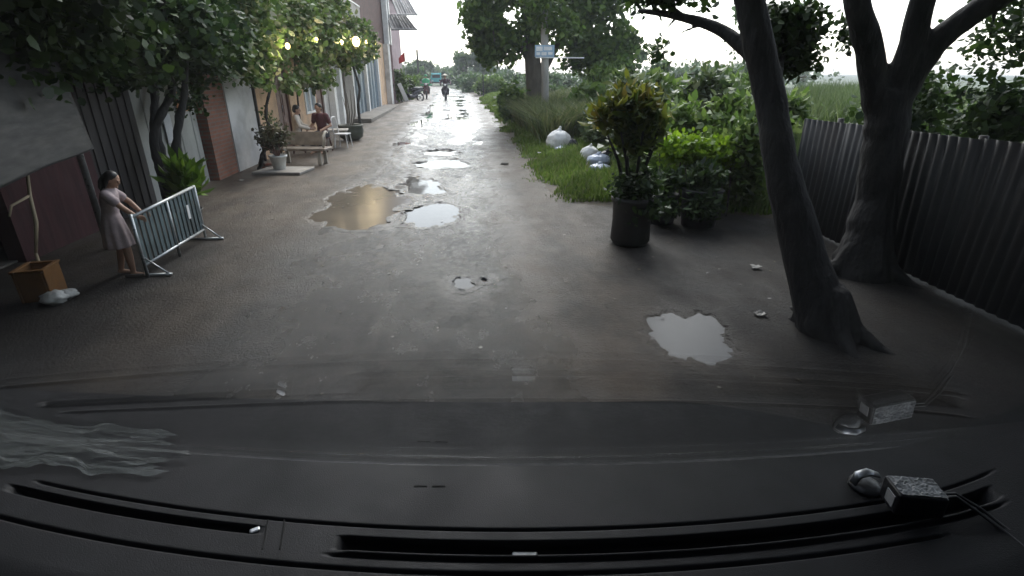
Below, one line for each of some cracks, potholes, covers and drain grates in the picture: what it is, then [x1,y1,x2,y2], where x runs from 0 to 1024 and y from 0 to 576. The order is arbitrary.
pothole [629,303,754,377]
pothole [382,173,452,198]
pothole [445,274,483,294]
pothole [418,148,466,157]
pothole [386,200,470,230]
pothole [299,181,428,233]
pothole [407,158,473,170]
